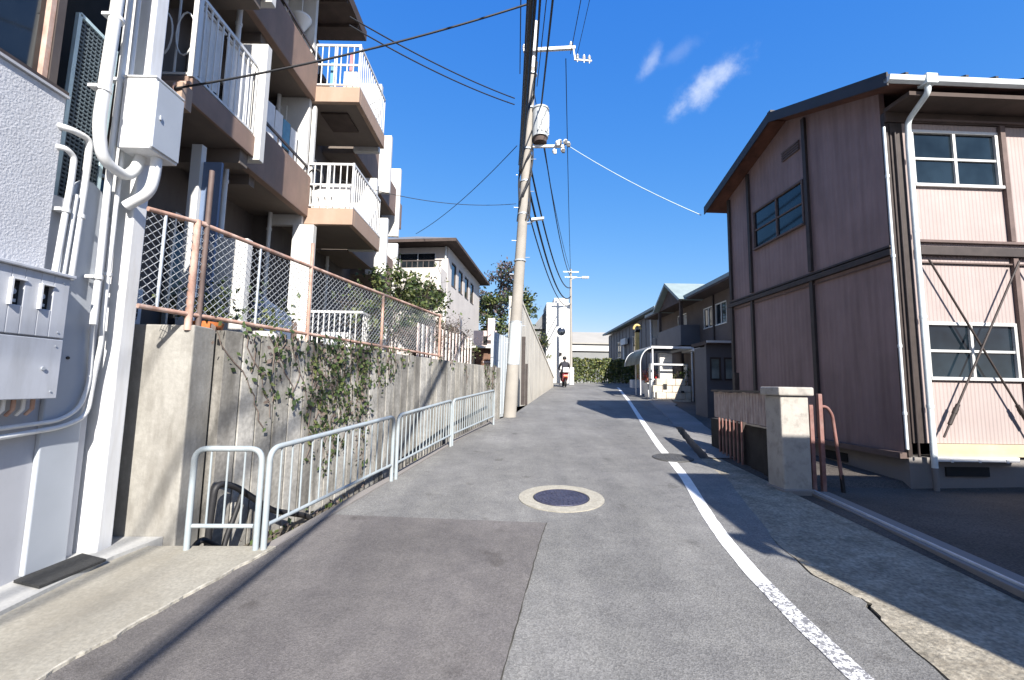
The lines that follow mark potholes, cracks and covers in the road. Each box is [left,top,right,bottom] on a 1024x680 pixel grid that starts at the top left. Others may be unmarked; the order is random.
manhole cover [652,453,694,463]
manhole cover [519,485,605,513]
